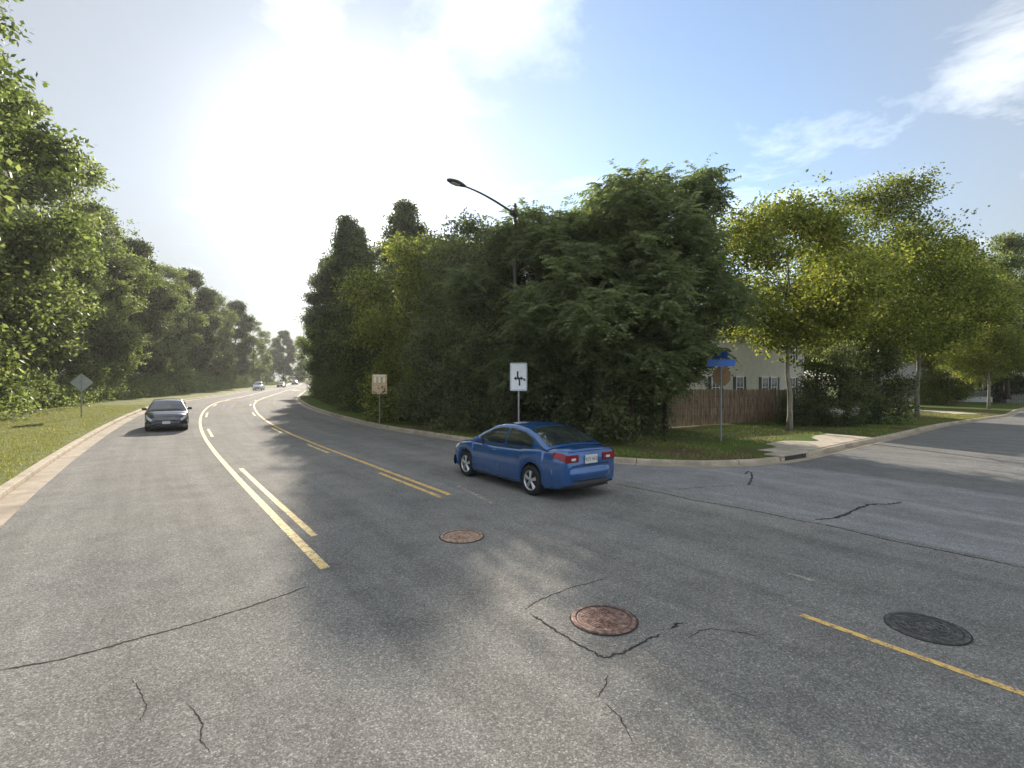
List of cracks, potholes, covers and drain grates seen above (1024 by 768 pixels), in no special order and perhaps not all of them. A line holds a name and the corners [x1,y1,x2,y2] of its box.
drain grate [764,450,809,461]
manhole cover [883,611,974,645]
manhole cover [569,604,639,636]
crack [525,577,762,658]
manhole cover [439,529,484,543]
crack [188,704,210,752]
crack [2,585,309,670]
crack [597,676,634,744]
